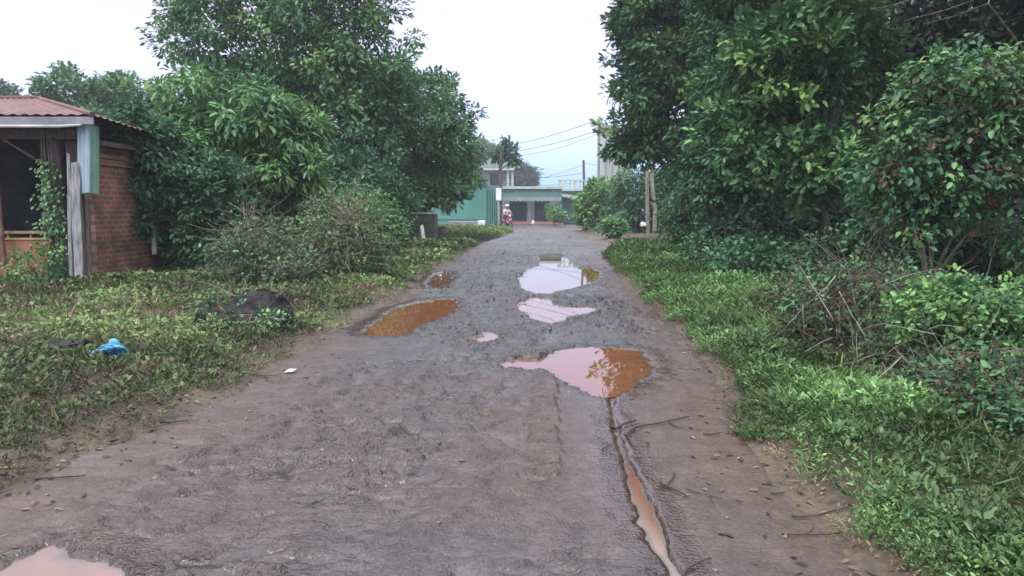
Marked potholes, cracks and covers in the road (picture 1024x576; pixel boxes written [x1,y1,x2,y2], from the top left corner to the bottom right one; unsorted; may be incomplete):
pothole [461,330,507,344]
pothole [510,250,606,294]
pothole [0,532,151,576]
pothole [486,342,668,399]
pothole [420,270,460,290]
pothole [355,296,467,337]
pothole [507,294,610,324]
